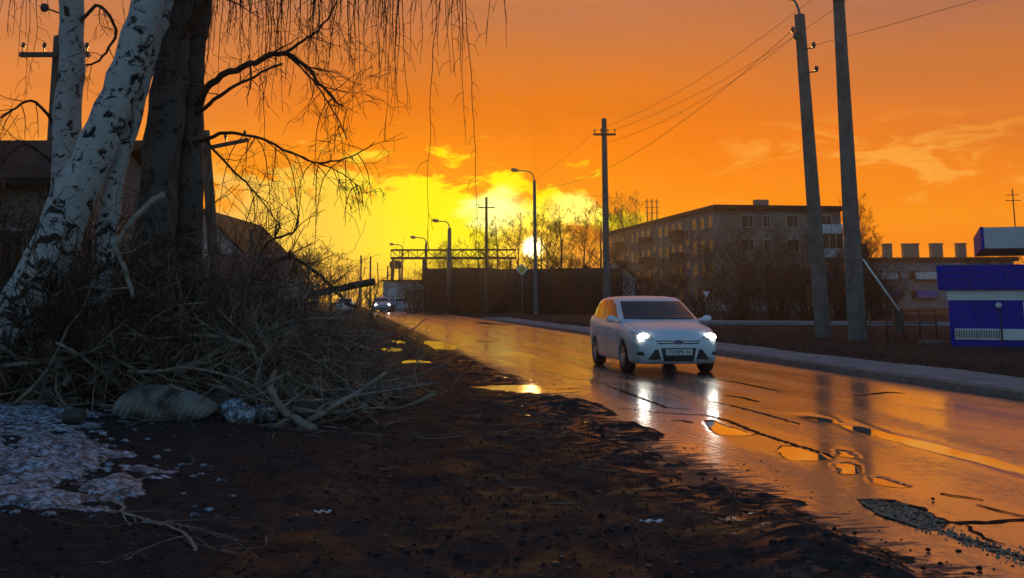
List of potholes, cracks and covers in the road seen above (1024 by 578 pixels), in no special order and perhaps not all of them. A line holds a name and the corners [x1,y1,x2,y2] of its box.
crack [857,493,1024,560]
pothole [703,420,753,436]
pothole [835,449,861,459]
pothole [834,462,862,475]
pothole [858,499,947,531]
crack [606,379,836,458]
pothole [777,445,828,461]
pothole [867,475,912,488]
